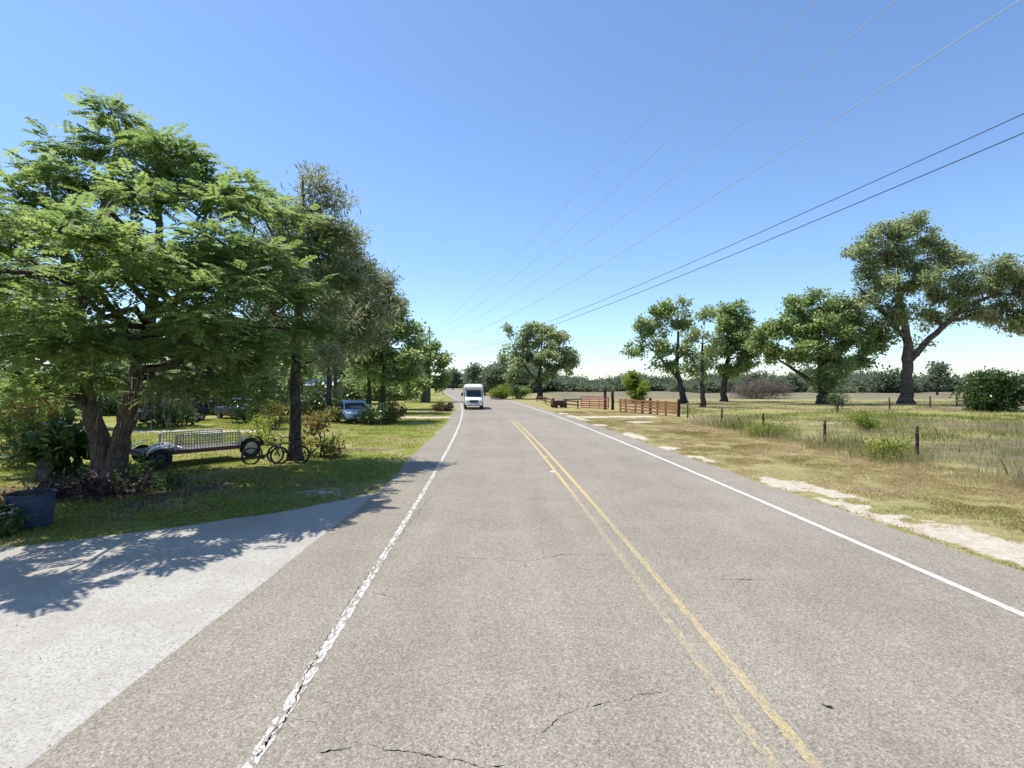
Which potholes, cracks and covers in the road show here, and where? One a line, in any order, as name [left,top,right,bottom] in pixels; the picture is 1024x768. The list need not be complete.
crack [527,690,668,738]
crack [412,541,615,569]
crack [317,734,514,768]
